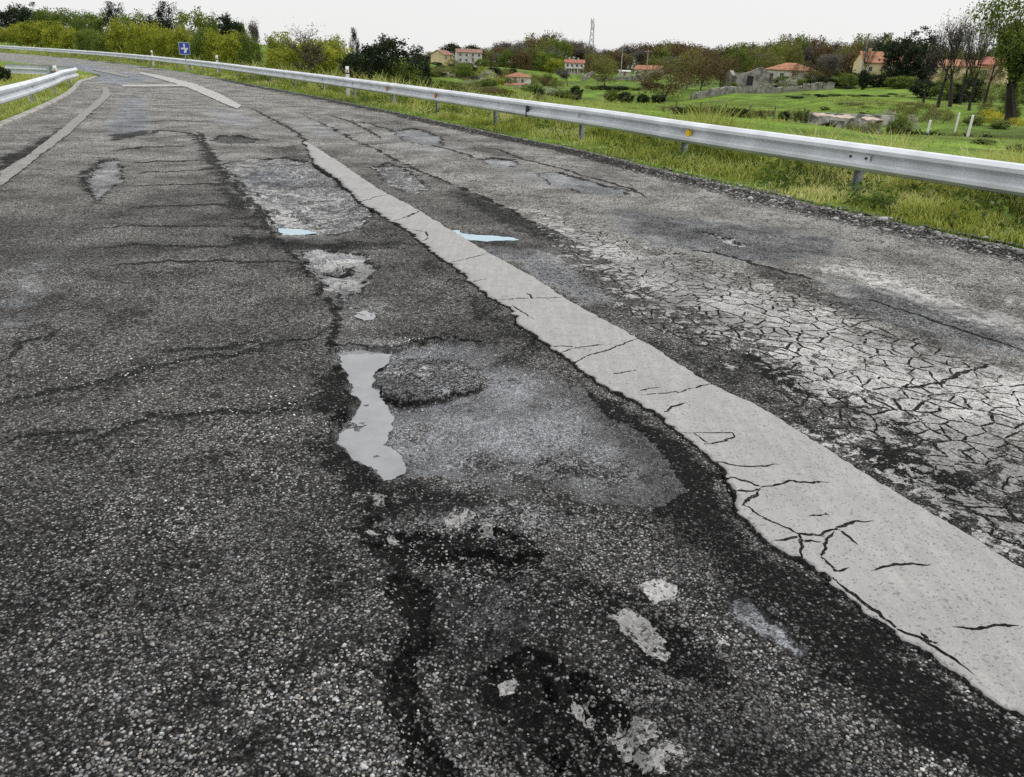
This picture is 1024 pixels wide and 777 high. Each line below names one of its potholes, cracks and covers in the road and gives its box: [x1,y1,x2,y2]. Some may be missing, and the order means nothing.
pothole [79,157,128,200]
crack [0,326,342,447]
pothole [217,157,377,237]
pothole [297,249,382,304]
pothole [531,172,631,195]
crack [529,212,1024,549]
pothole [324,335,689,508]
pothole [388,128,446,146]
pothole [475,156,523,168]
